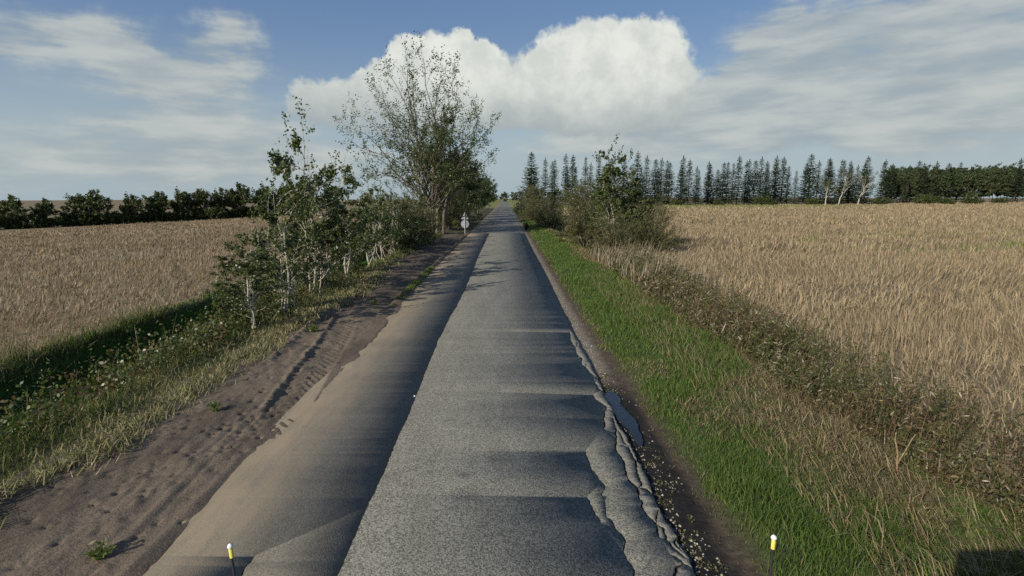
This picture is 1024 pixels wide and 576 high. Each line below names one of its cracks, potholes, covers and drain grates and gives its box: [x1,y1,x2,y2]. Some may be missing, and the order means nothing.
crack [569,333,690,576]
